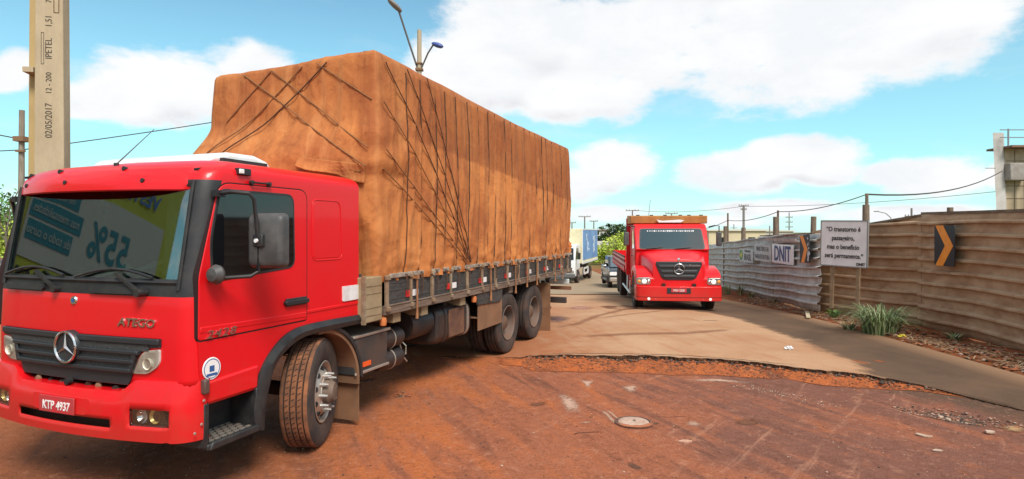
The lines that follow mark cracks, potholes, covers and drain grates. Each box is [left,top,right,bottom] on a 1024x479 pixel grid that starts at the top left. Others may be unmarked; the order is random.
pothole [770,368,961,397]
manhole cover [614,416,653,429]
pothole [499,357,777,379]
